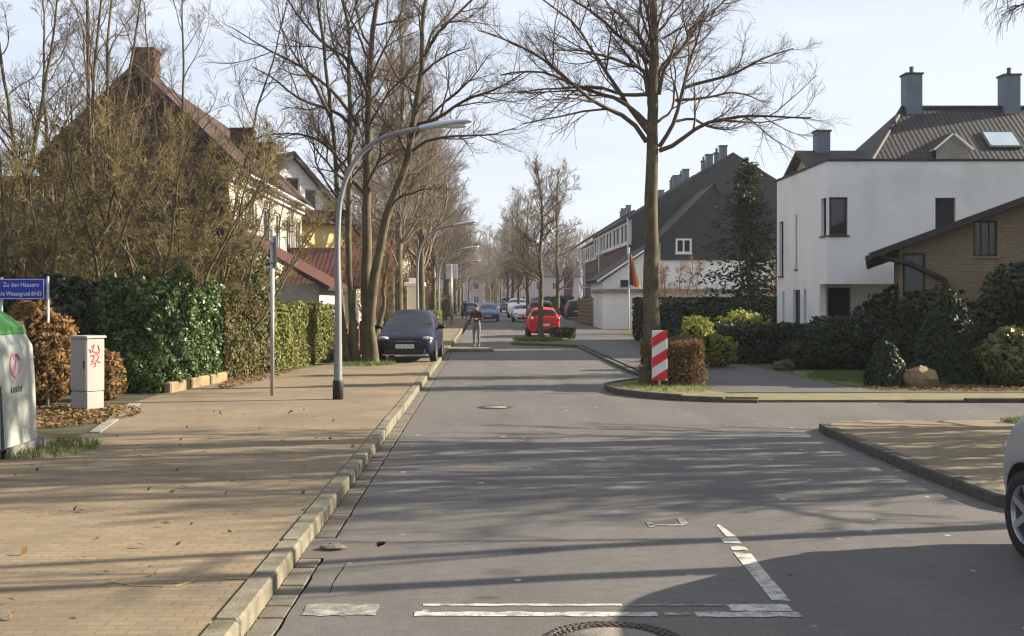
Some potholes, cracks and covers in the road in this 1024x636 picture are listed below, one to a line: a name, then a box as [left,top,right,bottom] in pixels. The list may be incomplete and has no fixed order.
manhole cover [543,621,682,636]
